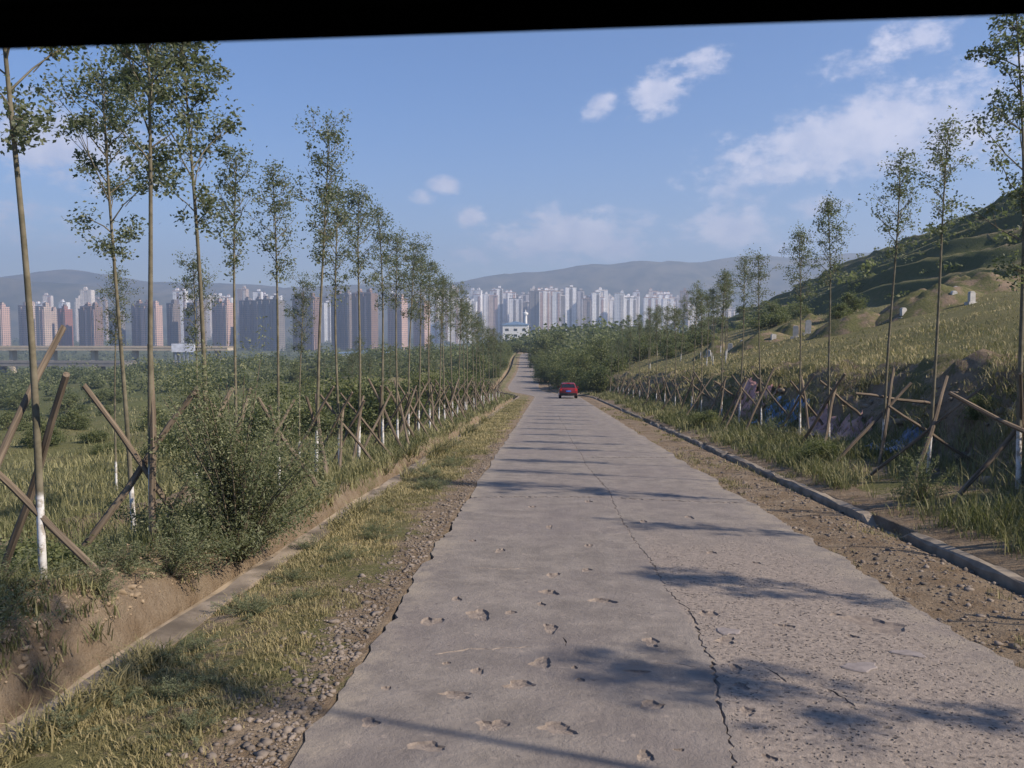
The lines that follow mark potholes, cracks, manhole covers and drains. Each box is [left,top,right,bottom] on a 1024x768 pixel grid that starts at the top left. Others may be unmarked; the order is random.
pothole [476,719,511,731]
crack [559,417,737,768]
pothole [407,740,446,752]
pothole [537,721,578,735]
pothole [528,656,551,669]
pothole [543,624,558,634]
pothole [465,609,490,621]
